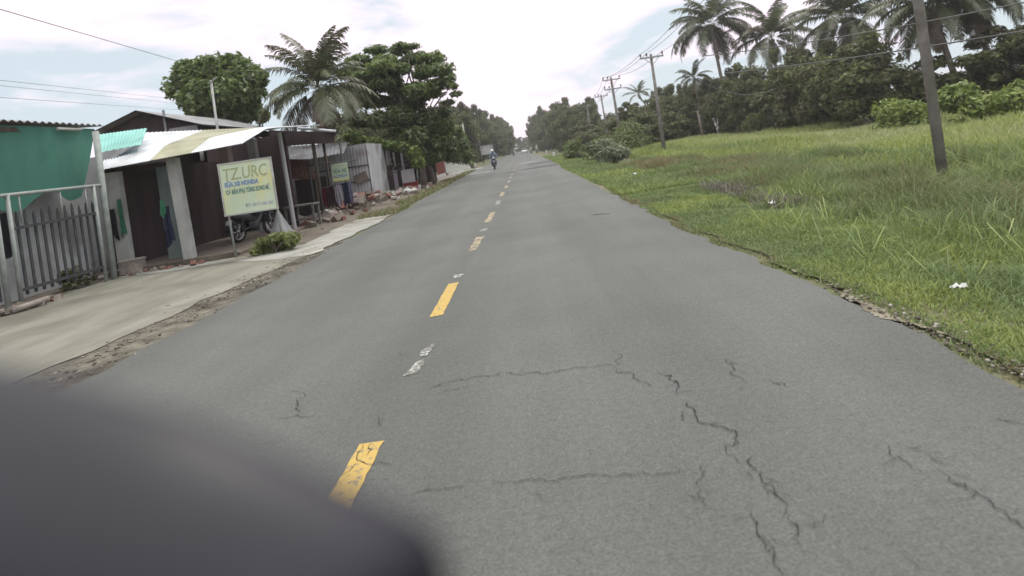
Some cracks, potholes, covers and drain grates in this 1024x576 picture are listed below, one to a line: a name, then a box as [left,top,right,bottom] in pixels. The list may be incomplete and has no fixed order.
crack [885,445,1024,528]
crack [424,353,652,393]
crack [419,464,725,515]
crack [662,370,826,575]
